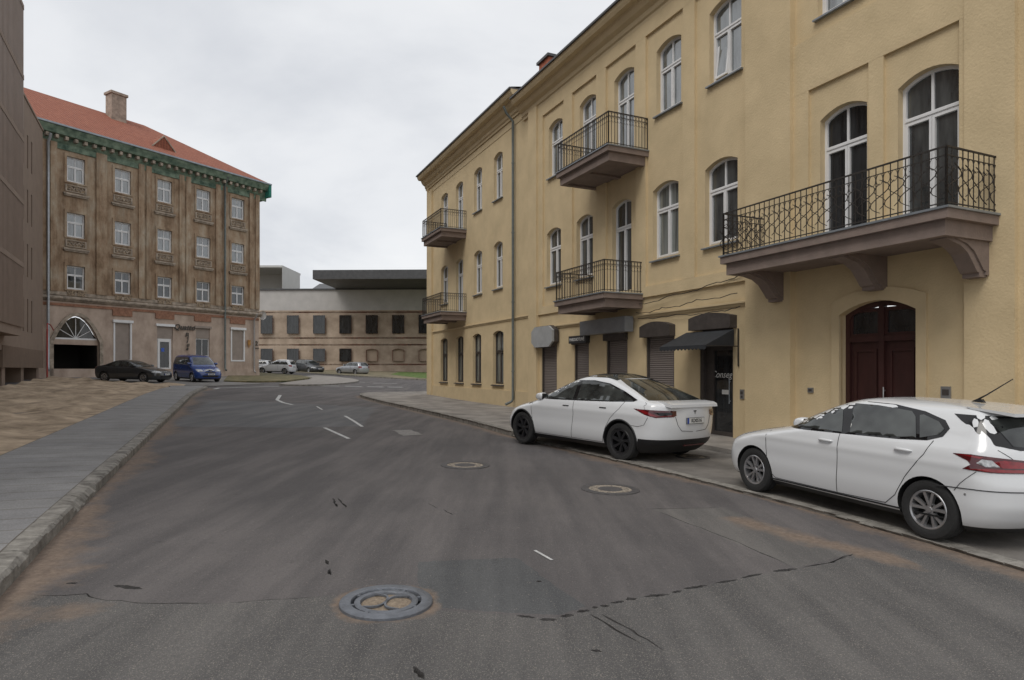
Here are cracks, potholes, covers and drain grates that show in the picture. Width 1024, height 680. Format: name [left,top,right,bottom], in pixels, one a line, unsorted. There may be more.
manhole cover [339,584,433,621]
manhole cover [441,461,490,469]
manhole cover [581,483,640,495]
